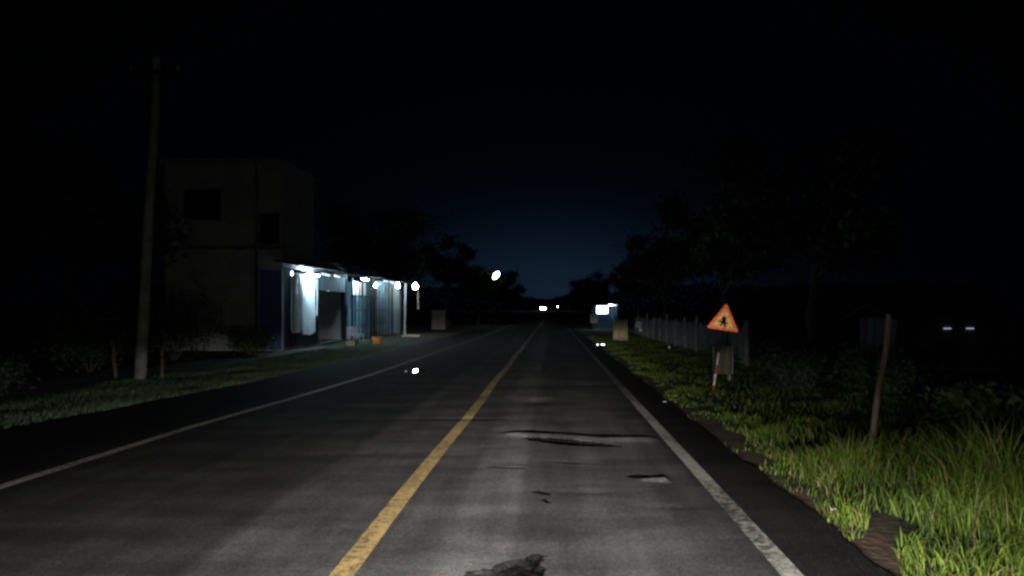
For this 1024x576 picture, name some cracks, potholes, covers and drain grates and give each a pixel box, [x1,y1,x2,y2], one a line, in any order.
crack [467,458,614,470]
pothole [446,548,570,576]
pothole [606,472,681,488]
pothole [486,427,671,454]
